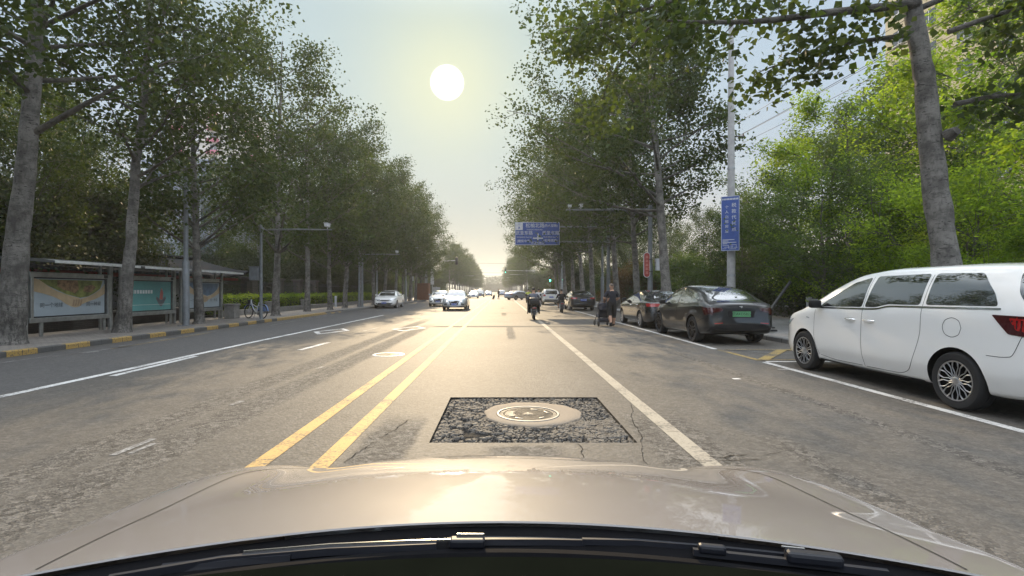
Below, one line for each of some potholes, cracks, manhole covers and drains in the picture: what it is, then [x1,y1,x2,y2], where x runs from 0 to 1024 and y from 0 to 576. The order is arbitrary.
manhole cover [484,402,582,427]
crack [429,397,660,465]
